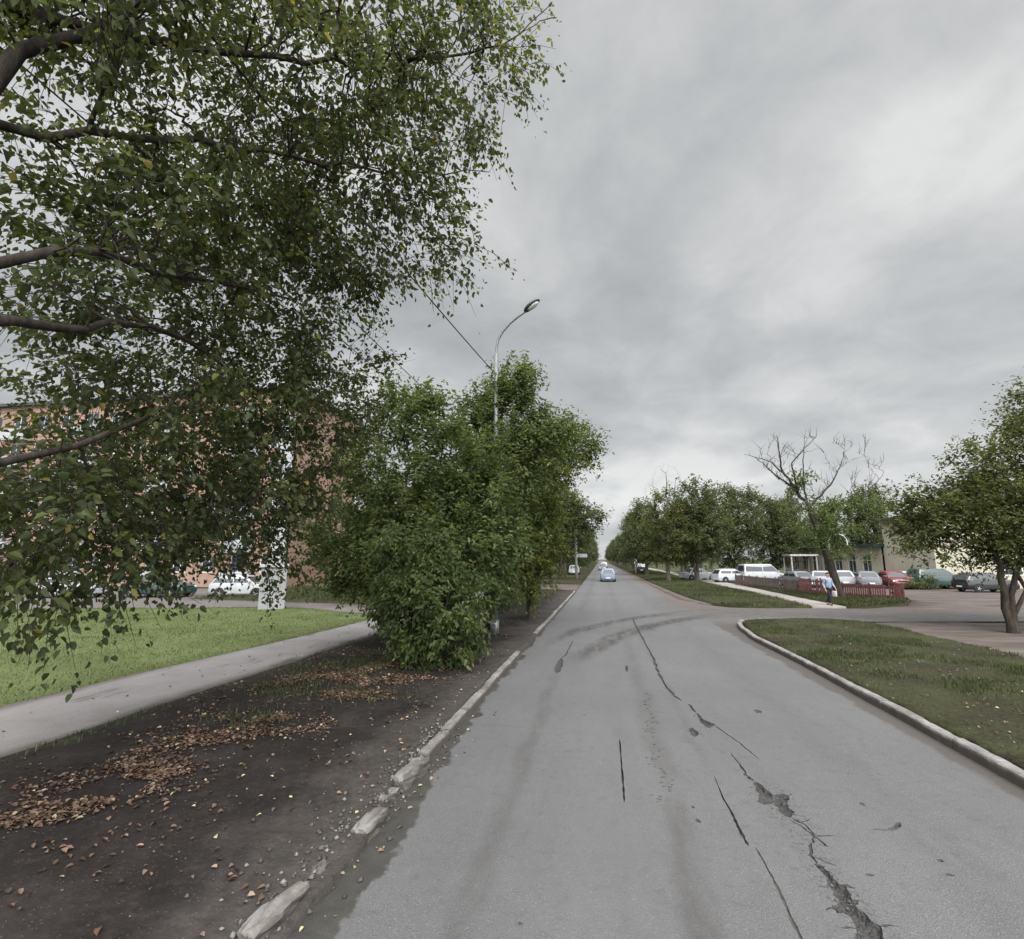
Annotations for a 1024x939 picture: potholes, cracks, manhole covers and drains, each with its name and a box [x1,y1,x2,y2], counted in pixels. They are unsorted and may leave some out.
crack [632,619,696,802]
crack [714,726,835,939]
pothole [749,781,799,821]
